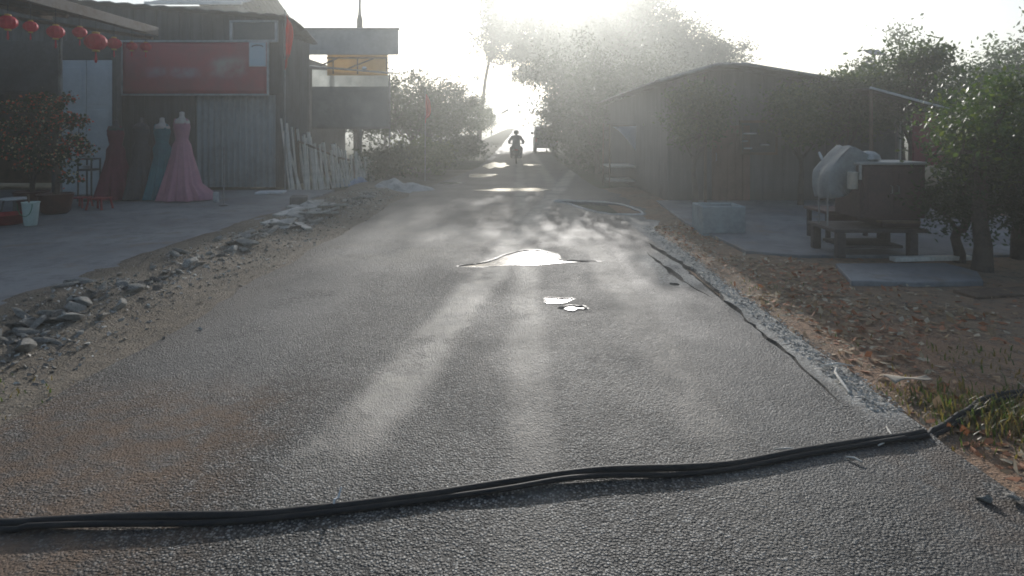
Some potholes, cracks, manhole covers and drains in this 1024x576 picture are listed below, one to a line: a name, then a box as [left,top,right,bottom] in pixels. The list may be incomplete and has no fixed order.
pothole [454,249,602,268]
crack [647,243,839,402]
